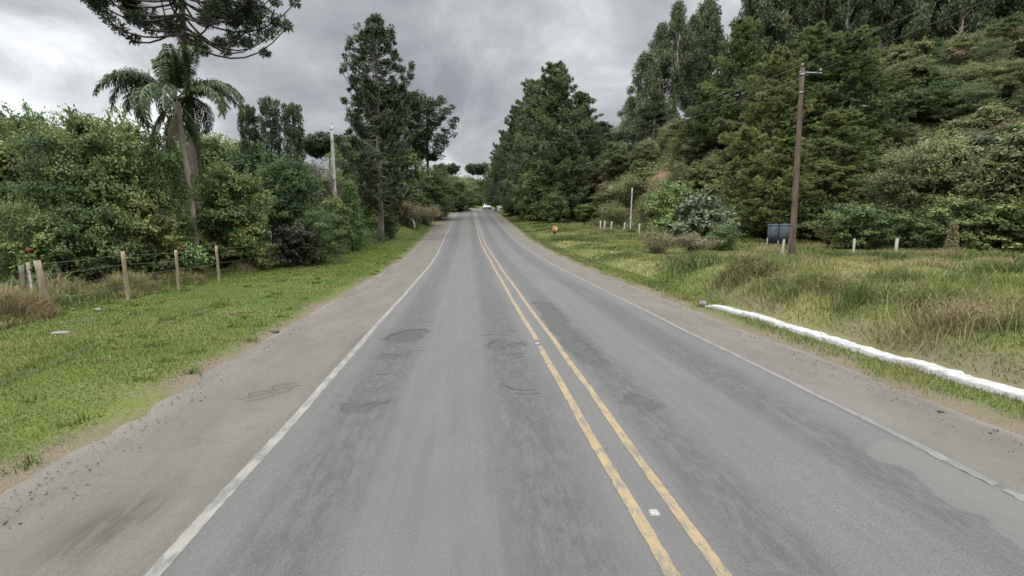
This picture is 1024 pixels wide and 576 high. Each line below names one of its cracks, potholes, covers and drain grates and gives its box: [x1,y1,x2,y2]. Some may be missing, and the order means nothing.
crack [238,383,300,401]
